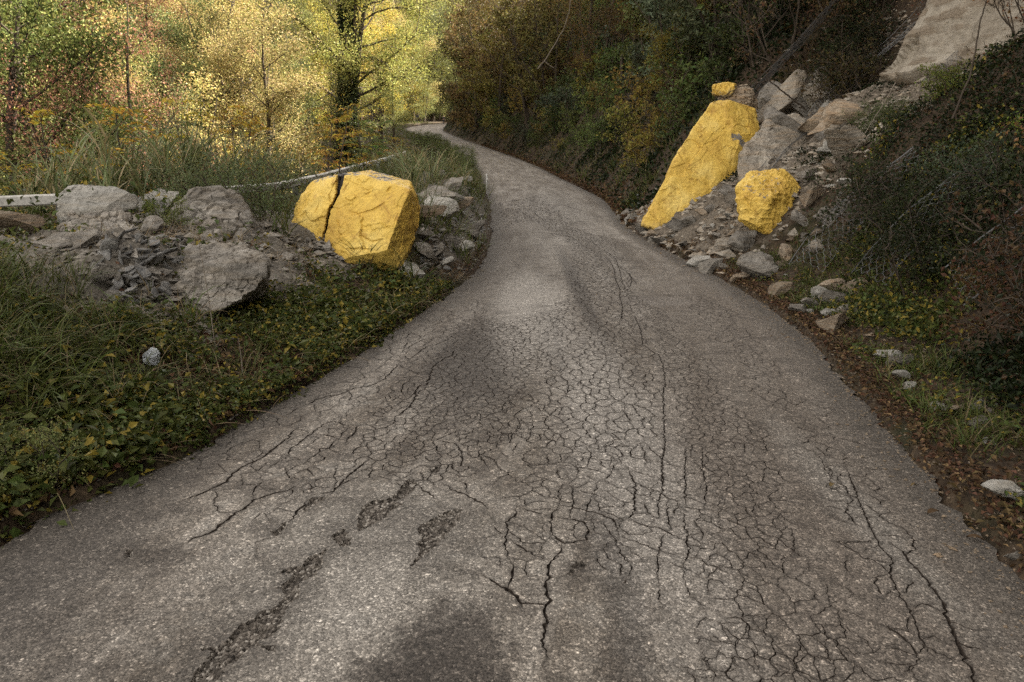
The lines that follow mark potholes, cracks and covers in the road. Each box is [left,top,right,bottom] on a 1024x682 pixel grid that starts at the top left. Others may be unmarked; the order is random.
pothole [191,548,328,682]
pothole [410,508,462,566]
crack [179,196,981,682]
pothole [357,479,419,531]
pothole [331,529,351,547]
